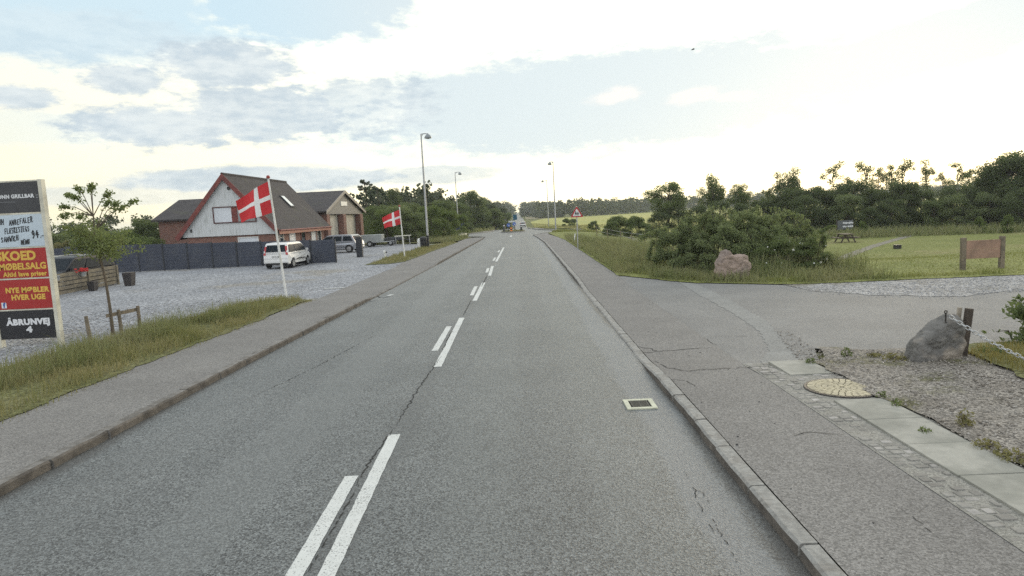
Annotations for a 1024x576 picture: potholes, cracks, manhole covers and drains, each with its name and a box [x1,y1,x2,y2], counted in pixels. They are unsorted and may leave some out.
crack [627,339,739,388]
crack [308,357,441,571]
crack [693,487,741,572]
drain grate [623,398,658,410]
manhole cover [803,378,875,399]
